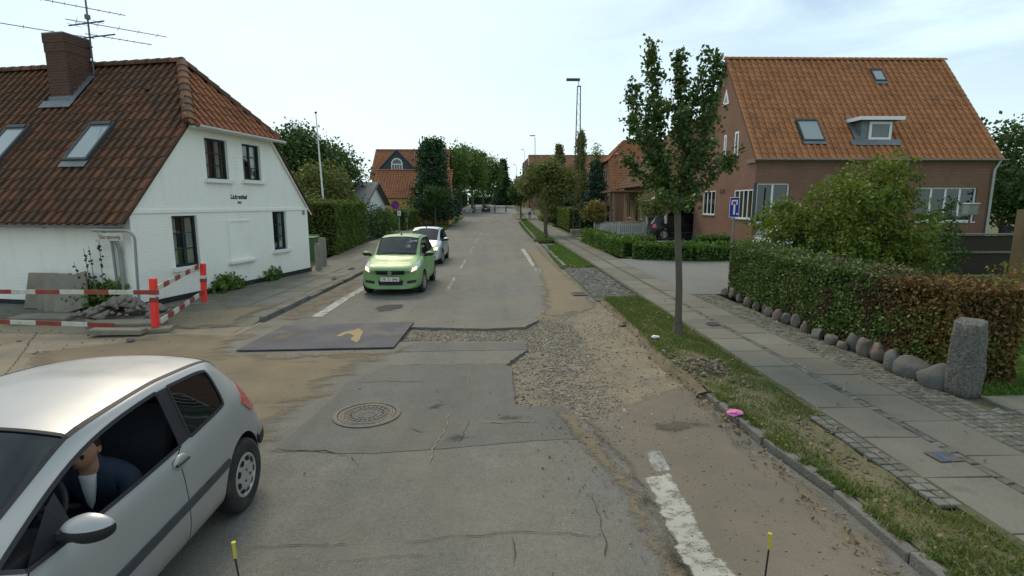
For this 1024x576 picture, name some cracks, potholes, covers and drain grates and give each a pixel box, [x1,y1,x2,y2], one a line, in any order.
manhole cover [332,401,401,428]
crack [414,415,469,462]
